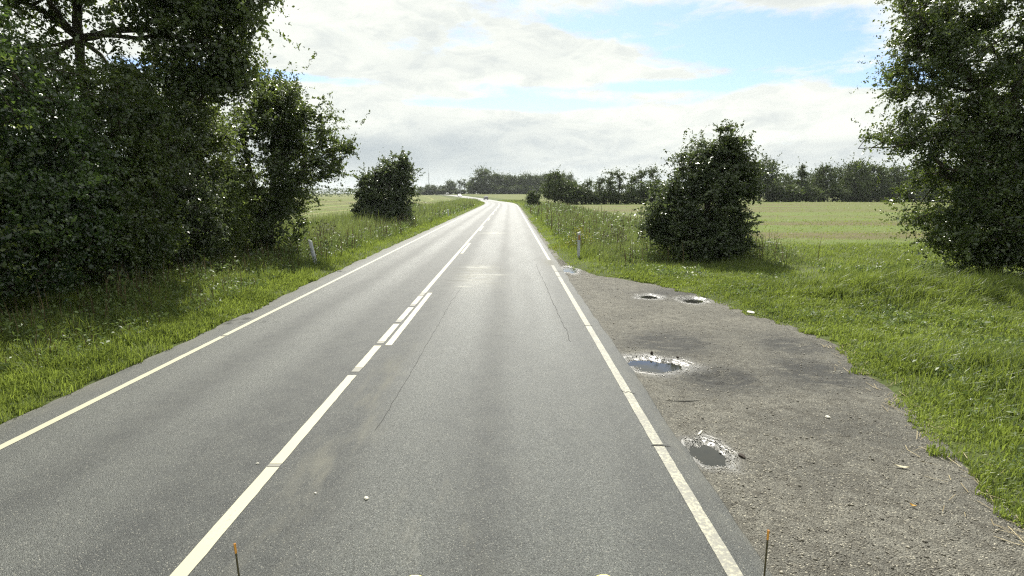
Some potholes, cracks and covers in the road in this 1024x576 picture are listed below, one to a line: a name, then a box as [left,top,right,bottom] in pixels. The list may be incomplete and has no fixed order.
pothole [681,430,750,476]
pothole [562,266,581,275]
pothole [672,295,713,305]
pothole [623,352,702,379]
